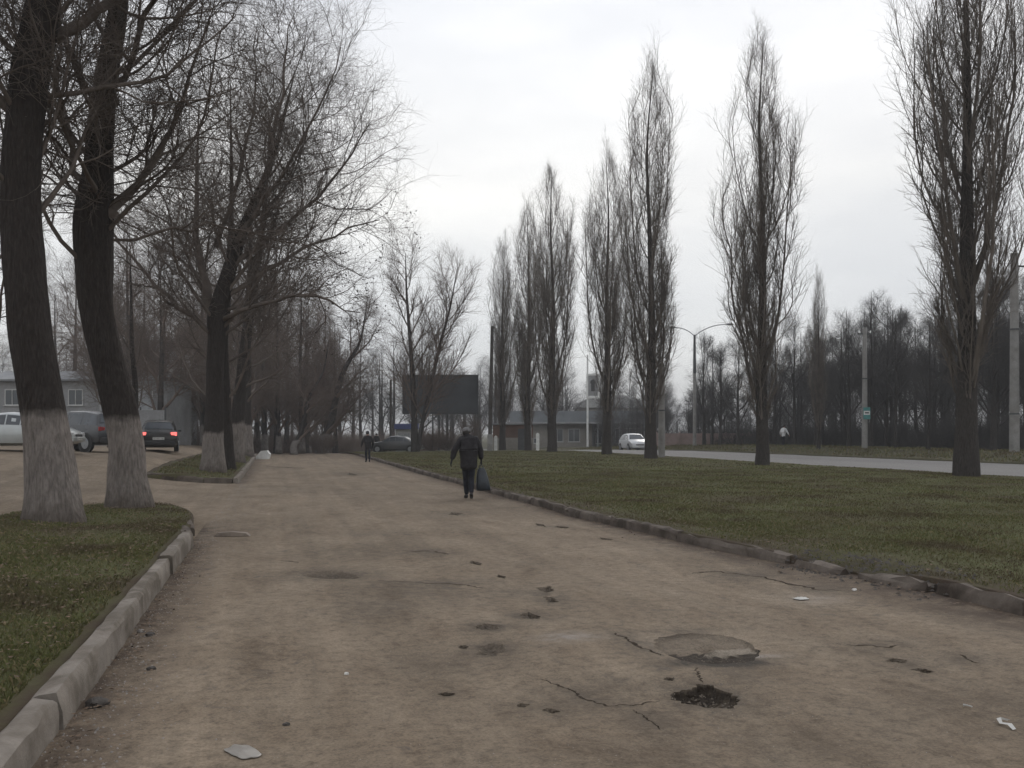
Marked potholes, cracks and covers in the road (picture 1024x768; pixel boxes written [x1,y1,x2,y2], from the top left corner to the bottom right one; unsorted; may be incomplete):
crack [614,633,661,655]
pothole [670,684,740,709]
crack [542,679,661,729]
crack [691,571,840,591]
